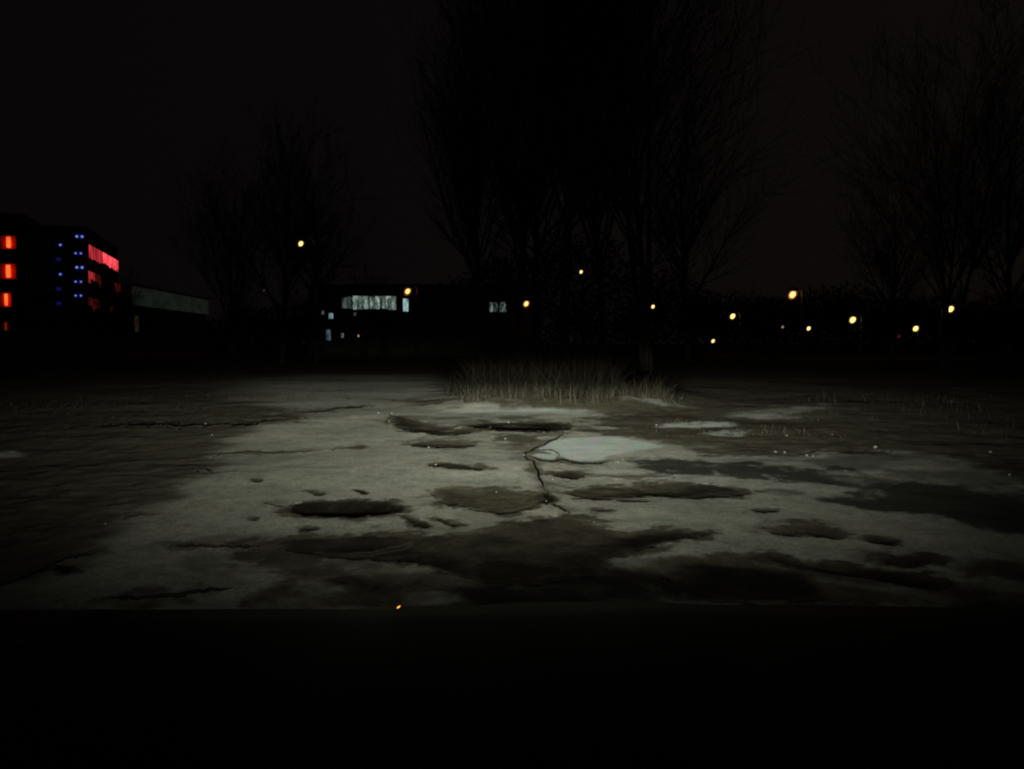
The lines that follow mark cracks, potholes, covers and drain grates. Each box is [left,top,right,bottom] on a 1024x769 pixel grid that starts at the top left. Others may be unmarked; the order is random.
pothole [430,487,545,513]
pothole [285,499,405,518]
pothole [767,521,850,539]
crack [519,431,673,514]
pothole [468,422,573,432]
crack [69,403,371,430]
pothole [389,415,475,435]
crack [199,444,367,473]
